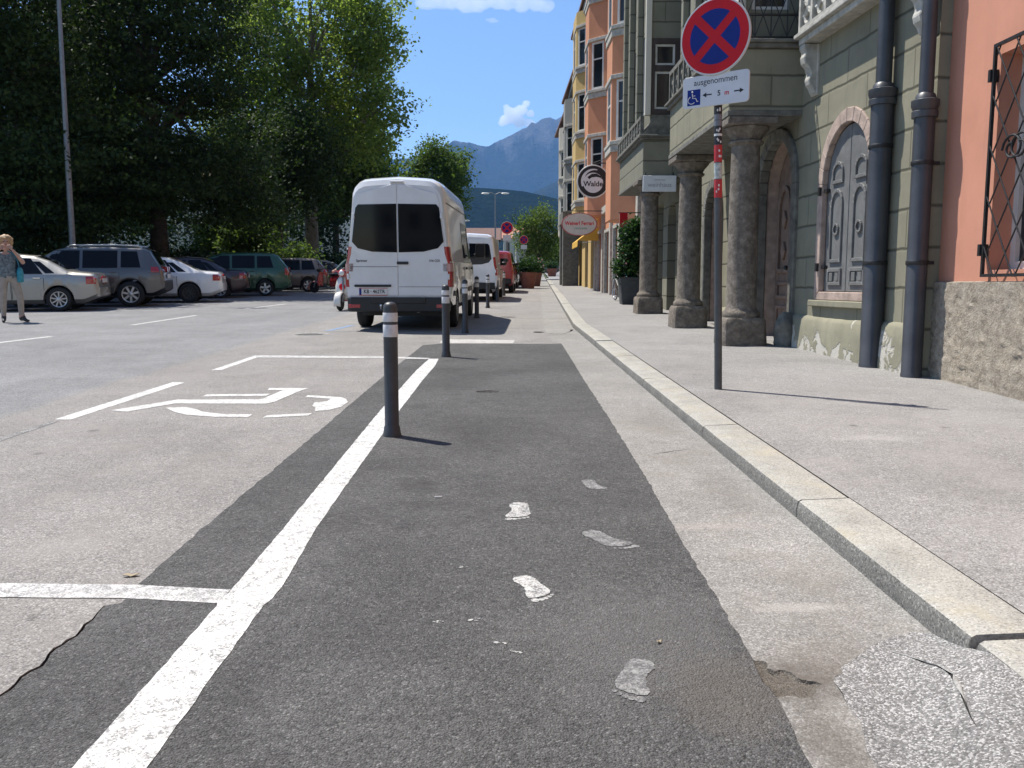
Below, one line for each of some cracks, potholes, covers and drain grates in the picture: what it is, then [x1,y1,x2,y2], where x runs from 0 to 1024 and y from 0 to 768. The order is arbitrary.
pothole [753,660,821,698]
crack [893,652,977,727]
